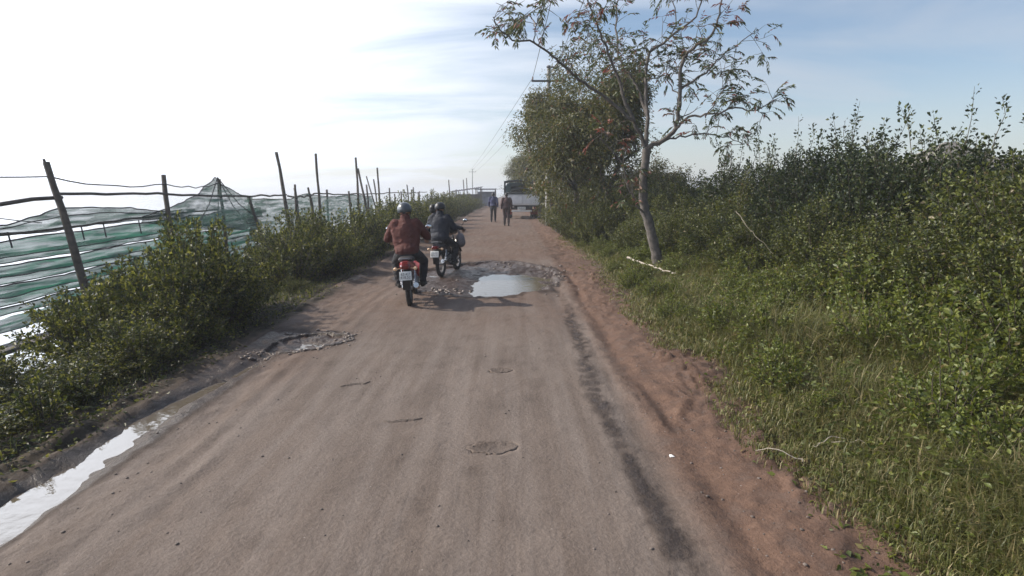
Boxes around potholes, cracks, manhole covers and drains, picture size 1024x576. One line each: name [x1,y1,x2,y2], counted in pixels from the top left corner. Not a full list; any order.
pothole [387,258,579,299]
pothole [235,329,362,368]
pothole [466,441,518,455]
